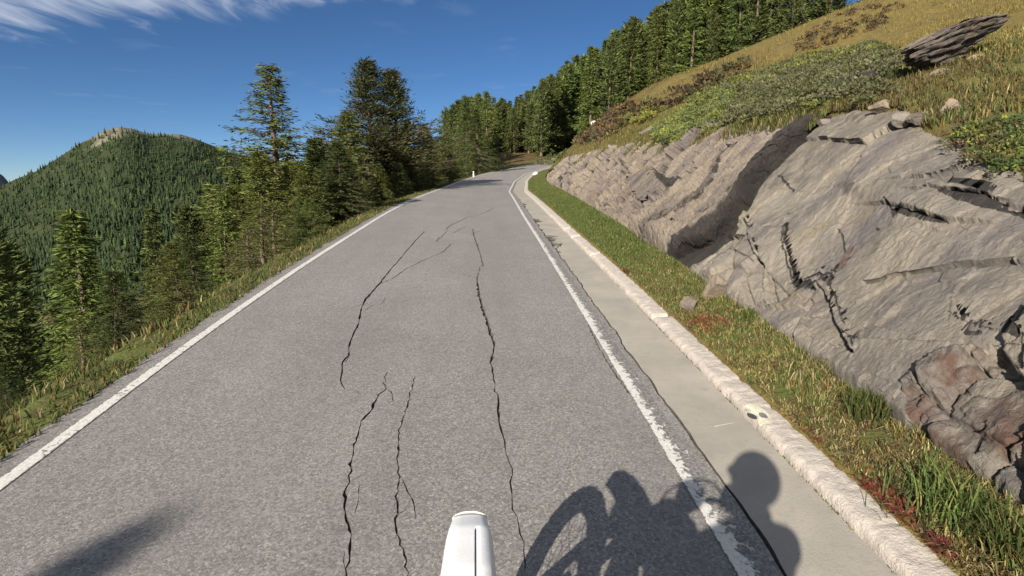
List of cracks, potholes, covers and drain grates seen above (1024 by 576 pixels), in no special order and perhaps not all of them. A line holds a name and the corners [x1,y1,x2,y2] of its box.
crack [326,208,526,576]
